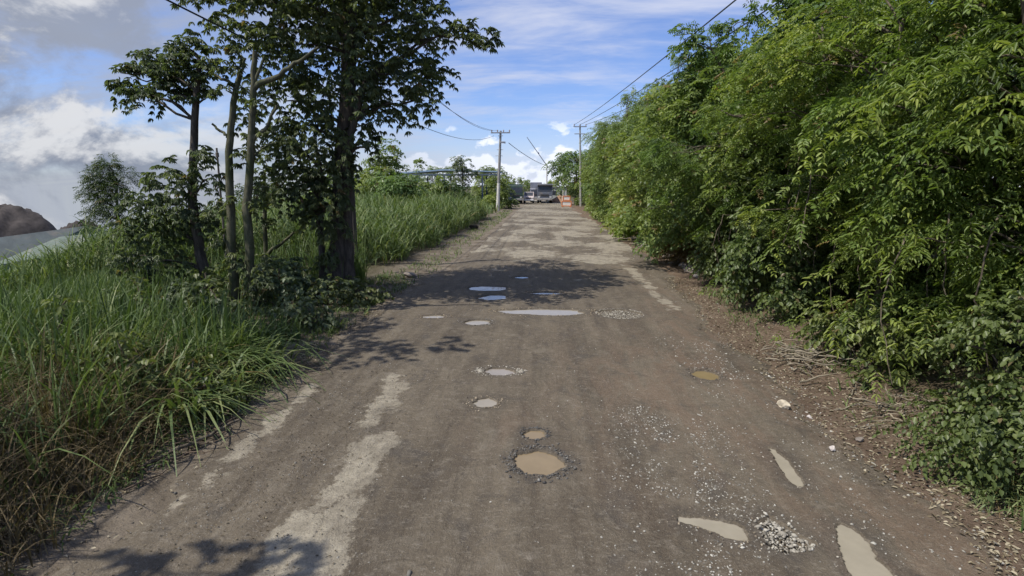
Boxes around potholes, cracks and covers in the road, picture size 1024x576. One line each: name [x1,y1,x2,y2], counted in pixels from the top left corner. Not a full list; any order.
pothole [476,307,609,317]
pothole [519,426,552,441]
pothole [468,365,527,376]
pothole [682,367,728,382]
pothole [825,518,920,576]
pothole [667,507,770,551]
pothole [495,439,585,484]
pothole [457,318,494,326]
pothole [466,395,504,412]
pothole [757,443,813,490]
